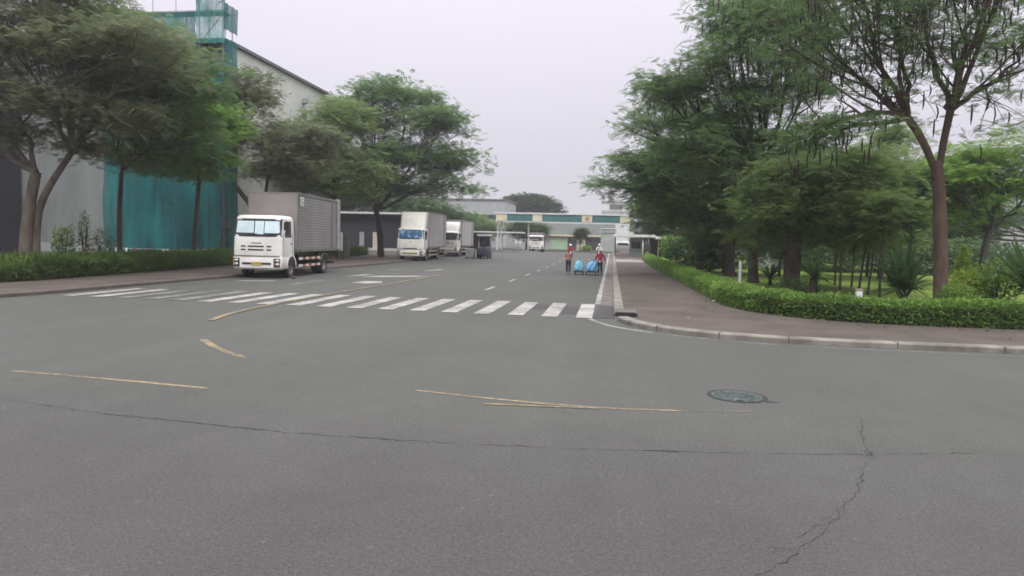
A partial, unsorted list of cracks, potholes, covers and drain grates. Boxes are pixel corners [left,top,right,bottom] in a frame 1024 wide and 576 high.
manhole cover [707,389,779,403]
drain grate [613,308,637,317]
crack [755,419,876,576]
